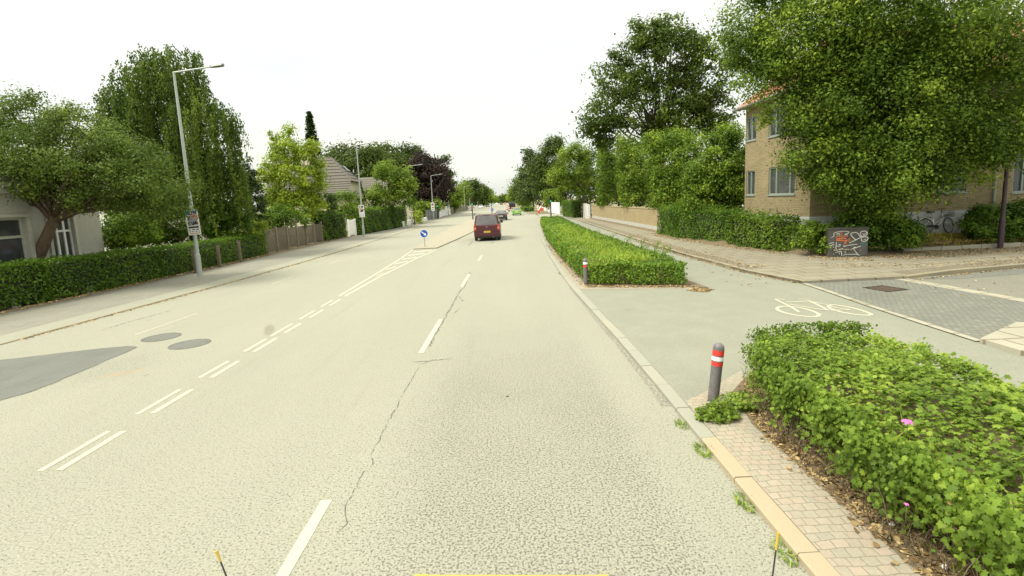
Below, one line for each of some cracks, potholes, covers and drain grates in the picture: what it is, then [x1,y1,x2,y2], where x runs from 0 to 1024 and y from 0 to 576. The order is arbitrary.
crack [328,272,471,523]
manhole cover [168,339,211,350]
manhole cover [141,333,182,342]
